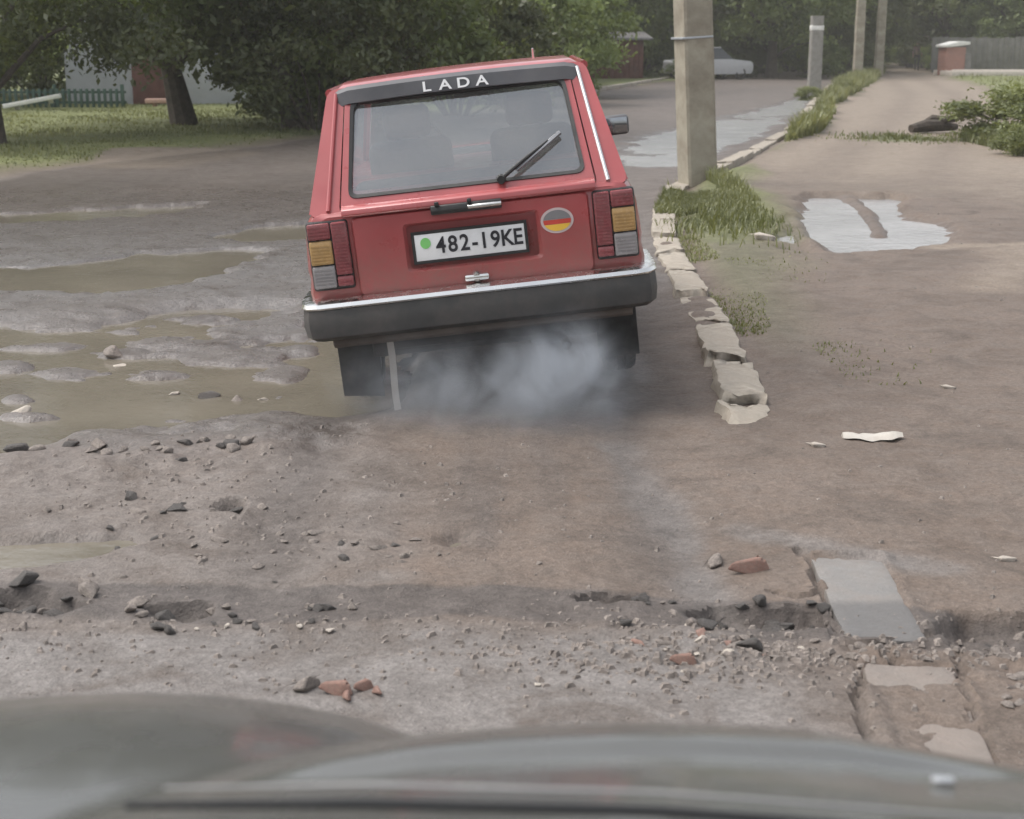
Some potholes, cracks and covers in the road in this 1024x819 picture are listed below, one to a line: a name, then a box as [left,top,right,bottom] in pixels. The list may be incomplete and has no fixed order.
pothole [0,201,212,223]
pothole [686,603,830,632]
pothole [0,246,286,294]
pothole [574,591,637,604]
pothole [141,599,217,623]
pothole [762,190,972,254]
pothole [0,585,85,617]
pothole [0,297,417,456]
